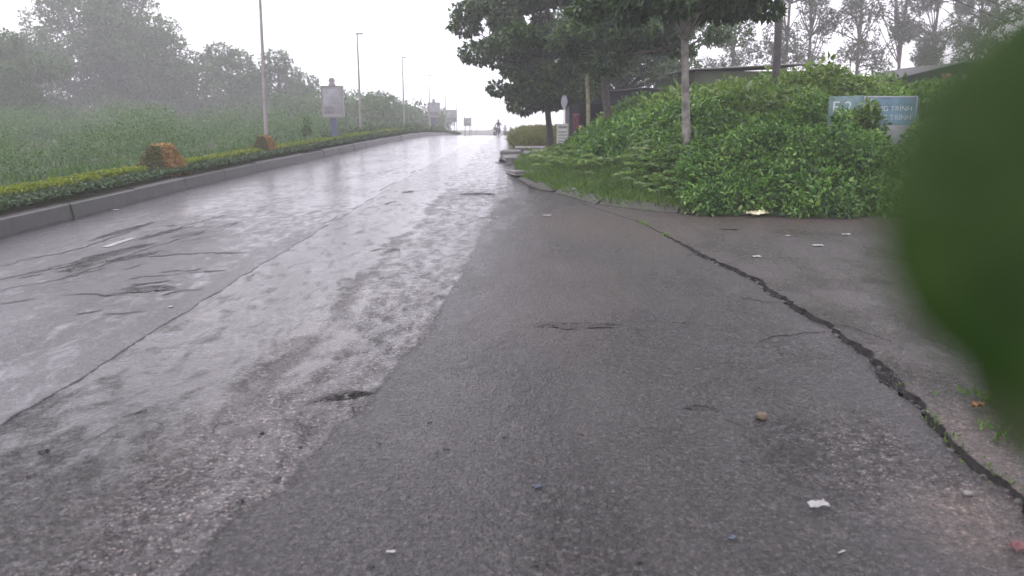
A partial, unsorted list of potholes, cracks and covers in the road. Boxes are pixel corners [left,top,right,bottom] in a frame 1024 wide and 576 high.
pothole [325,391,378,401]
crack [637,221,1024,516]
crack [2,213,251,314]
